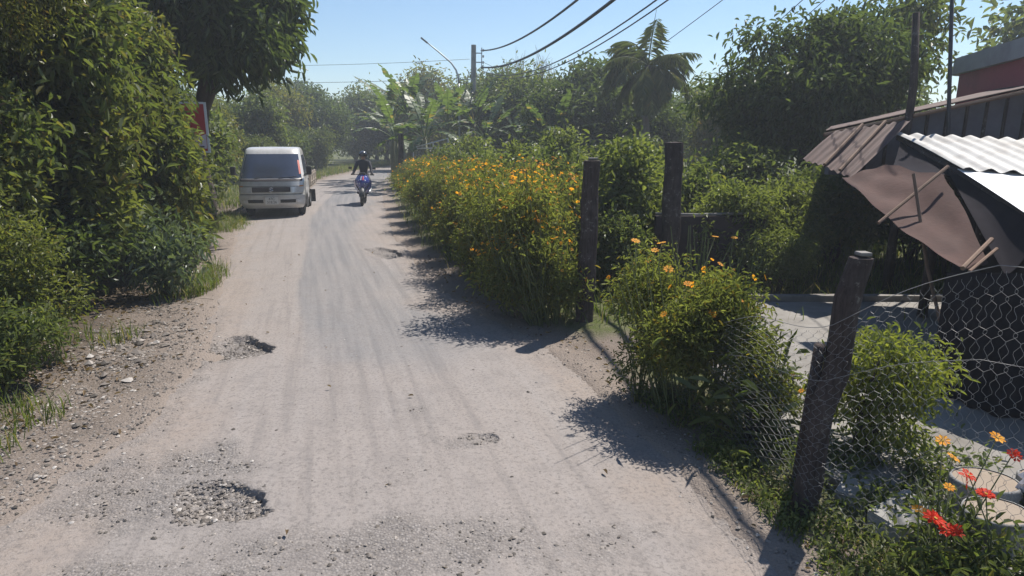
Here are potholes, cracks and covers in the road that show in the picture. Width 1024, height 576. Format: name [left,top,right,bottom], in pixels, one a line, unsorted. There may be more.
pothole [361,247,405,260]
pothole [201,333,280,365]
pothole [452,430,506,449]
pothole [159,477,282,531]
